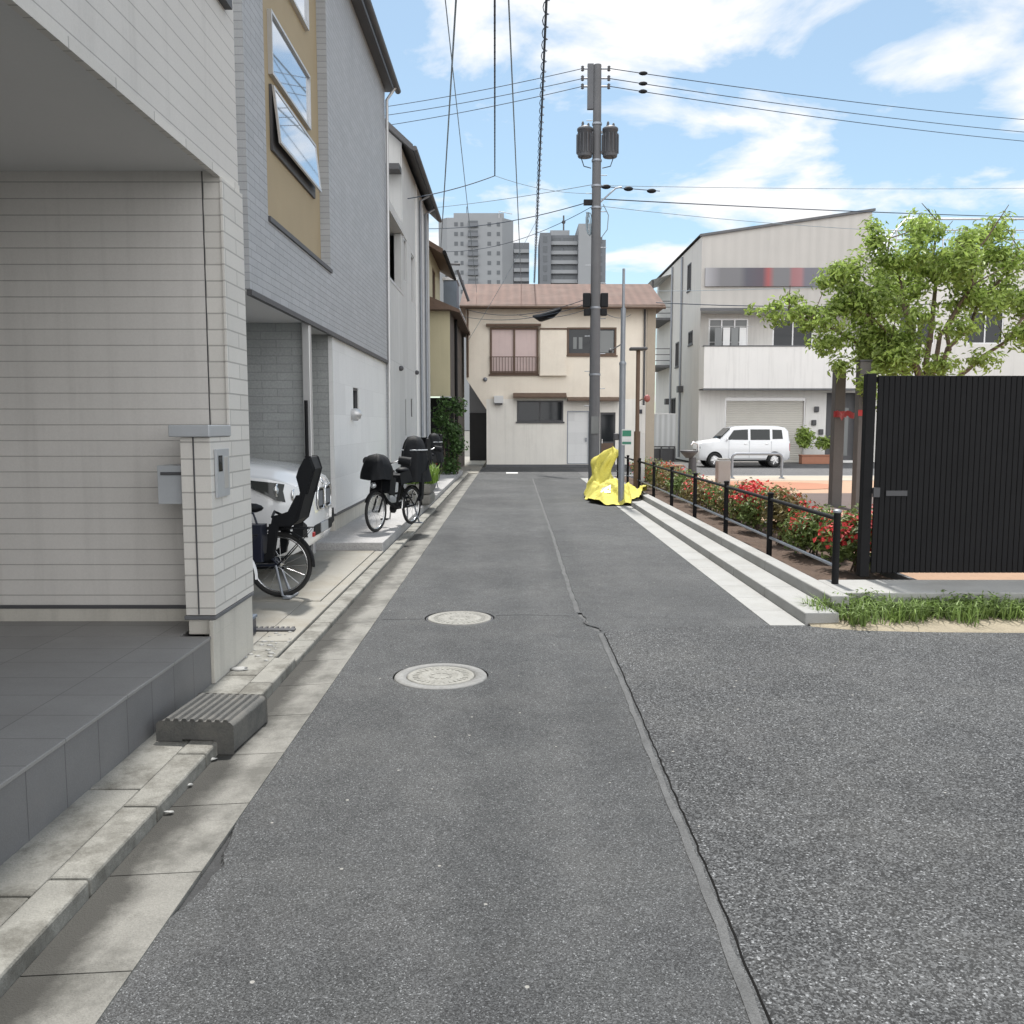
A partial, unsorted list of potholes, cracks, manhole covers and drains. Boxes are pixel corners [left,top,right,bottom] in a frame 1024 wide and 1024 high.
manhole cover [393,663,488,690]
manhole cover [426,611,494,626]
